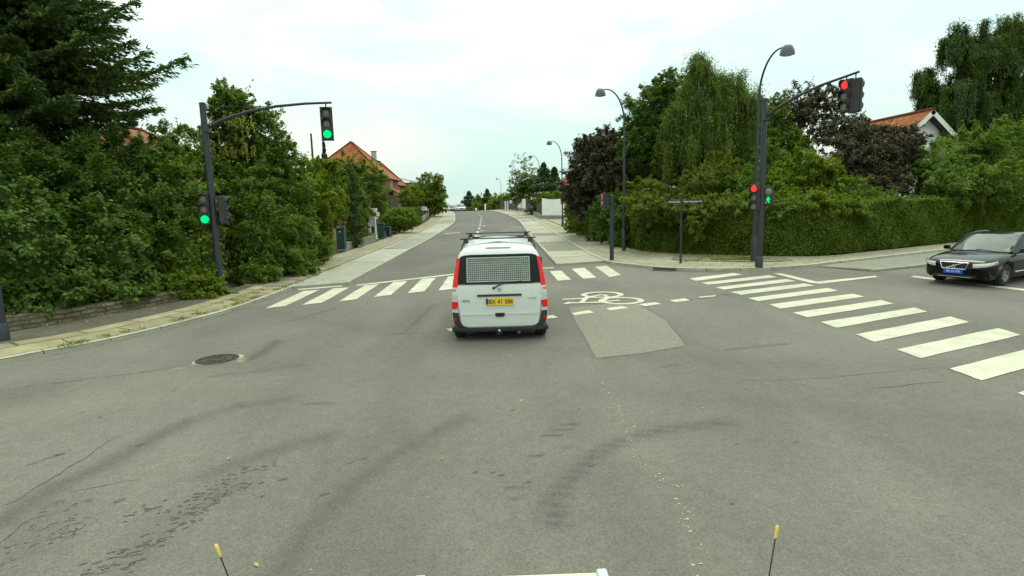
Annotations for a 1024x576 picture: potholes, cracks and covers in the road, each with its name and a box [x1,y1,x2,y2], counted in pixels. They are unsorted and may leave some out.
crack [0,436,138,567]
manhole cover [192,354,244,365]
